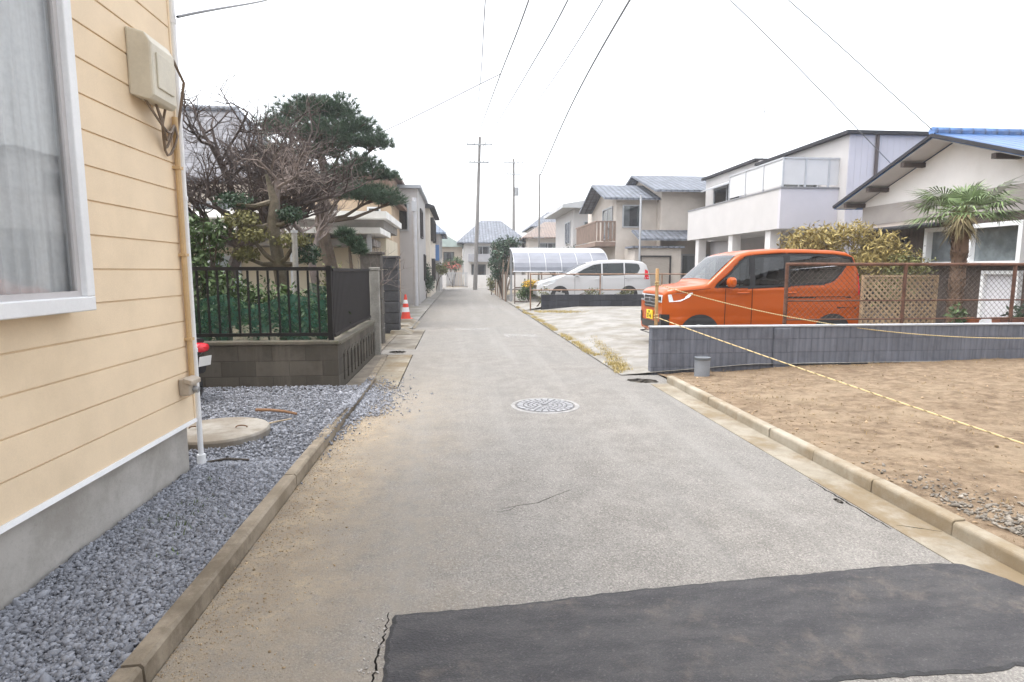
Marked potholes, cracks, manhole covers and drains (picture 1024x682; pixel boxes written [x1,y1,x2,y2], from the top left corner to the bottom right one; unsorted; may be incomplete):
crack [371,613,389,682]
manhole cover [511,398,580,414]
